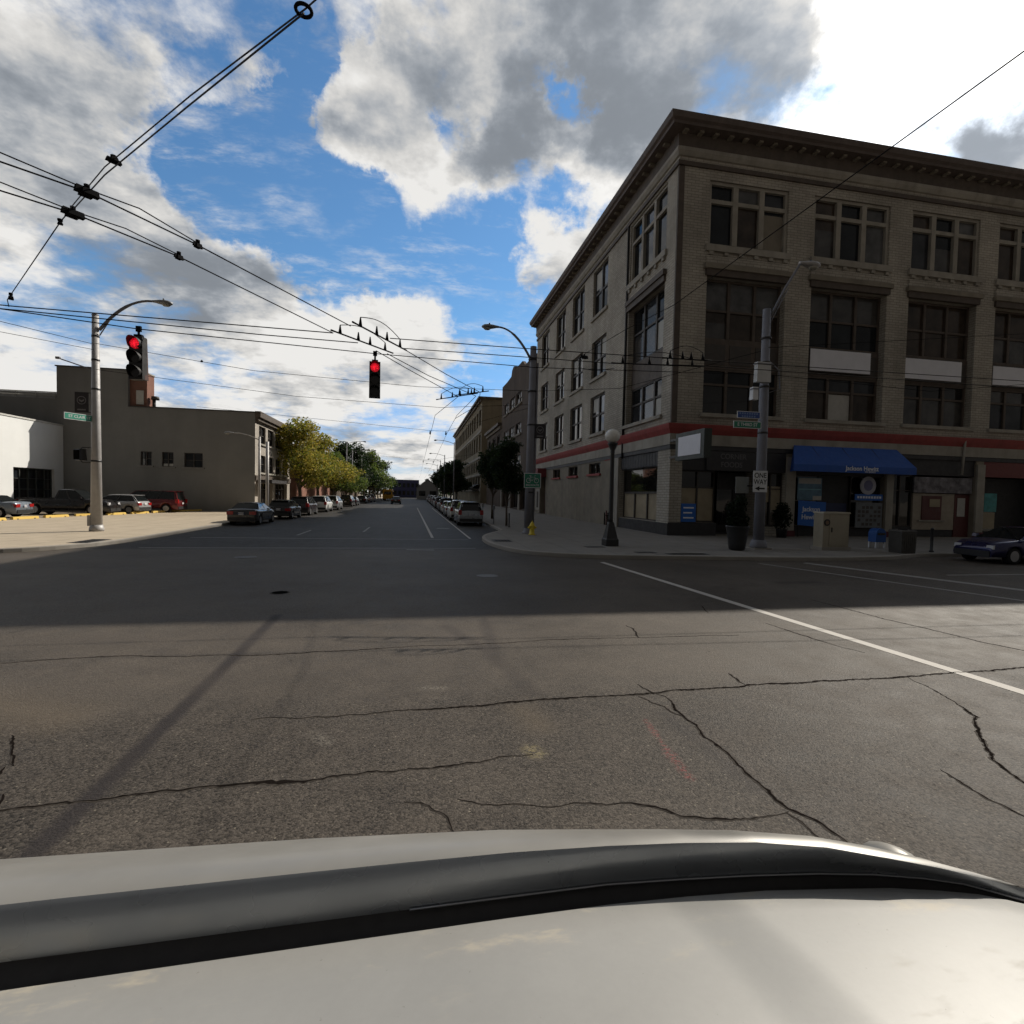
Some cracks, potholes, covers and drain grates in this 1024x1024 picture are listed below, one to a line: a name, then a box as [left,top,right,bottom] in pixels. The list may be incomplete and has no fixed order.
crack [908,677,1024,816]
crack [0,693,849,843]
crack [0,626,731,664]
